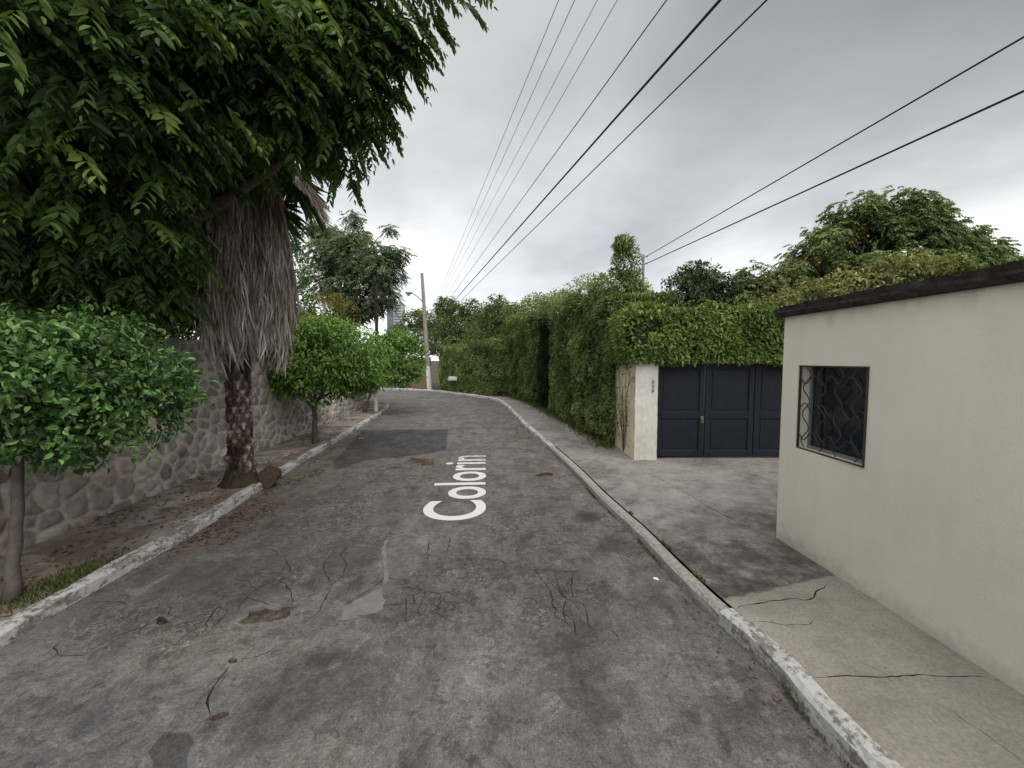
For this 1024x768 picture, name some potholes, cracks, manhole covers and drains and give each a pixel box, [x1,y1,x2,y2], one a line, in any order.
crack [295,535,458,628]
pothole [238,606,293,625]
pothole [209,712,229,721]
crack [42,548,294,663]
pothole [405,457,435,467]
crack [532,562,607,636]
